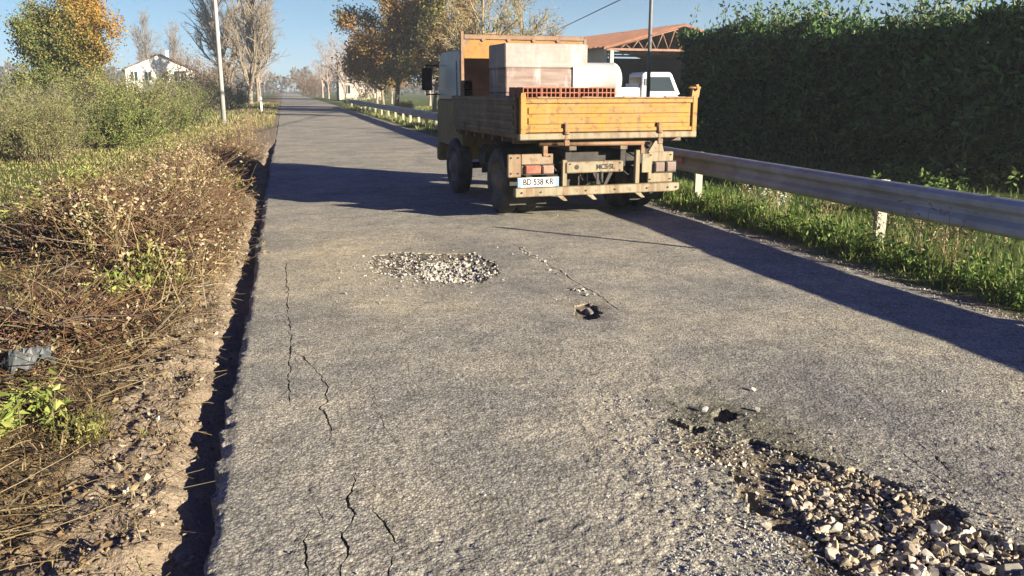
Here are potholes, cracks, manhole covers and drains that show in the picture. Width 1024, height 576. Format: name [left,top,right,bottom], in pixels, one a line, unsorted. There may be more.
pothole [666,419,708,436]
crack [285,261,332,442]
pothole [711,408,740,423]
pothole [368,252,501,284]
pothole [684,438,1024,576]
pothole [573,303,603,320]
crack [302,454,399,576]
crack [515,245,622,312]
